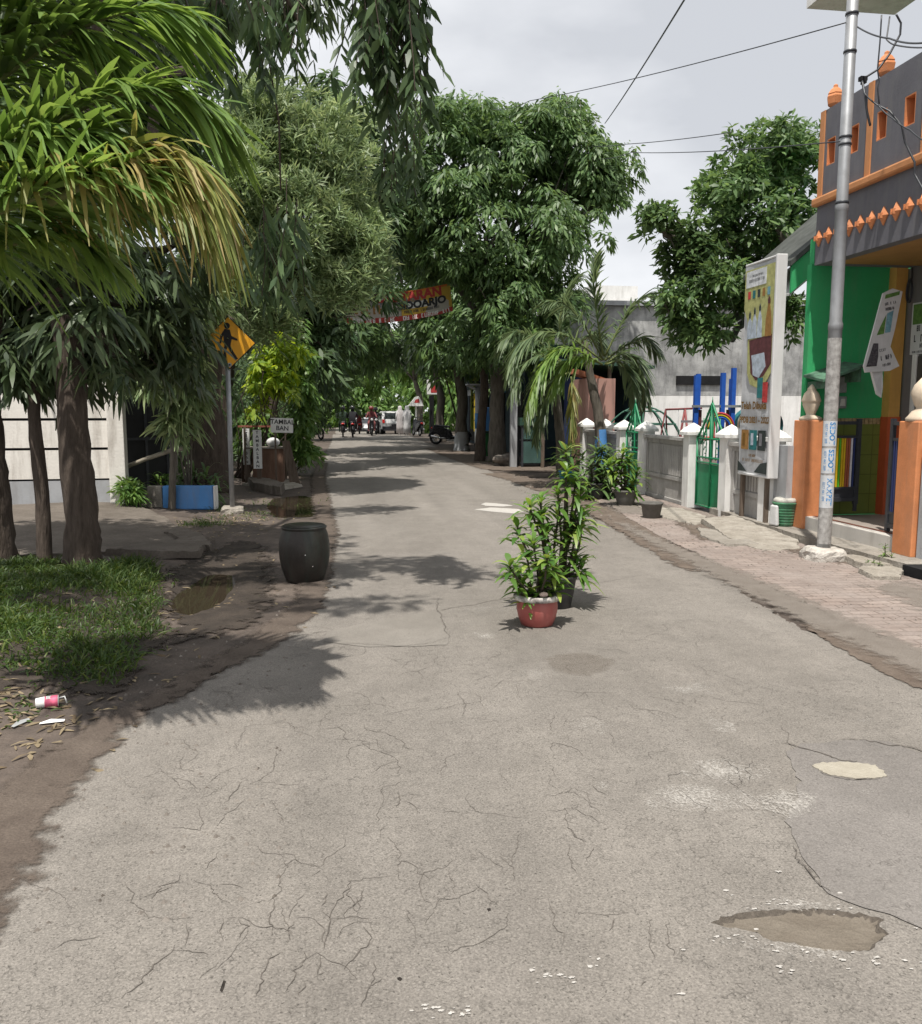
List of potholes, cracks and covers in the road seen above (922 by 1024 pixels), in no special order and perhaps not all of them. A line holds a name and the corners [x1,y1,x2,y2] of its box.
crack [543,767,605,873]
pothole [711,908,888,952]
crack [793,845,829,890]
crack [781,725,922,779]
crack [648,918,675,958]
crack [548,899,631,944]
crack [116,599,523,1006]
